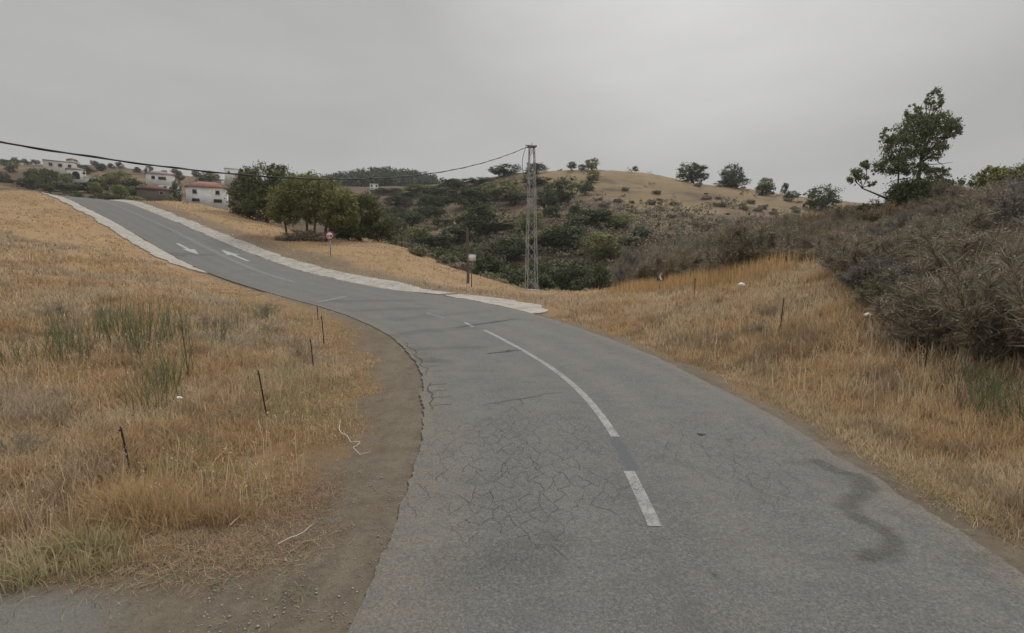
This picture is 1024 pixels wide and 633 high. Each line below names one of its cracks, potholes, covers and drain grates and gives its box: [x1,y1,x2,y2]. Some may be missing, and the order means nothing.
crack [406,342,450,410]
crack [404,406,635,561]
